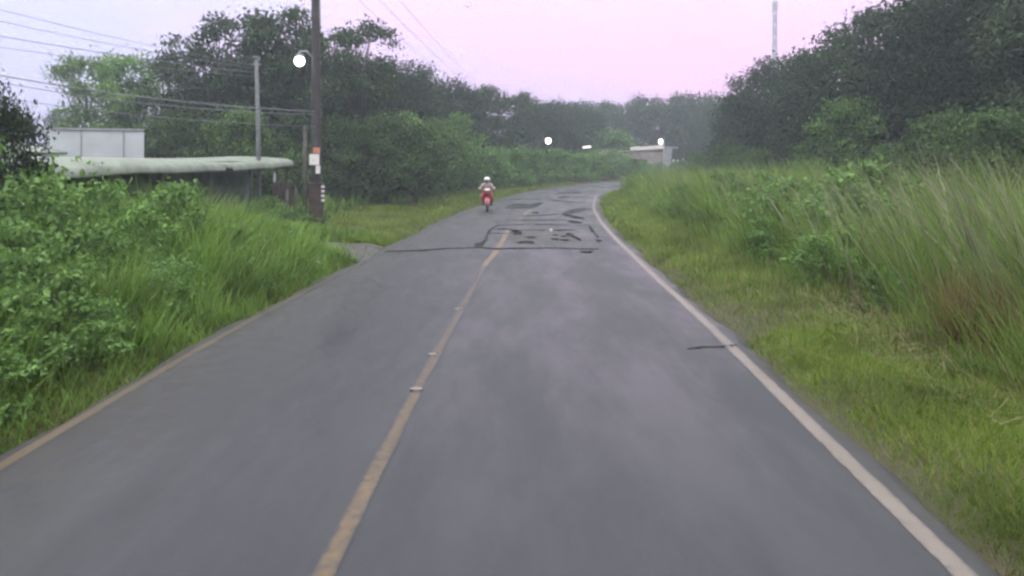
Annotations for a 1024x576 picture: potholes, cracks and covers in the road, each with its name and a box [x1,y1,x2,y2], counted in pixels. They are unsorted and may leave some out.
crack [386,199,599,252]
